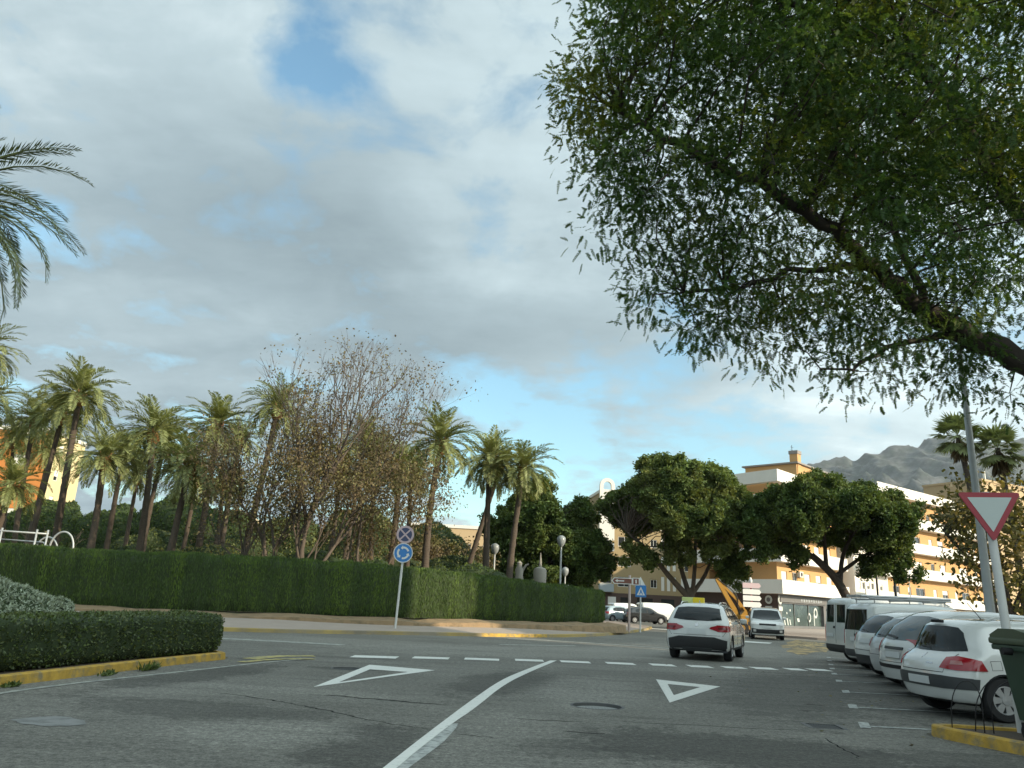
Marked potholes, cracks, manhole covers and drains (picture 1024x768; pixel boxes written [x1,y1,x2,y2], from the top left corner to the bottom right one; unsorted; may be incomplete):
manhole cover [570,702,625,710]
crack [216,692,442,729]
